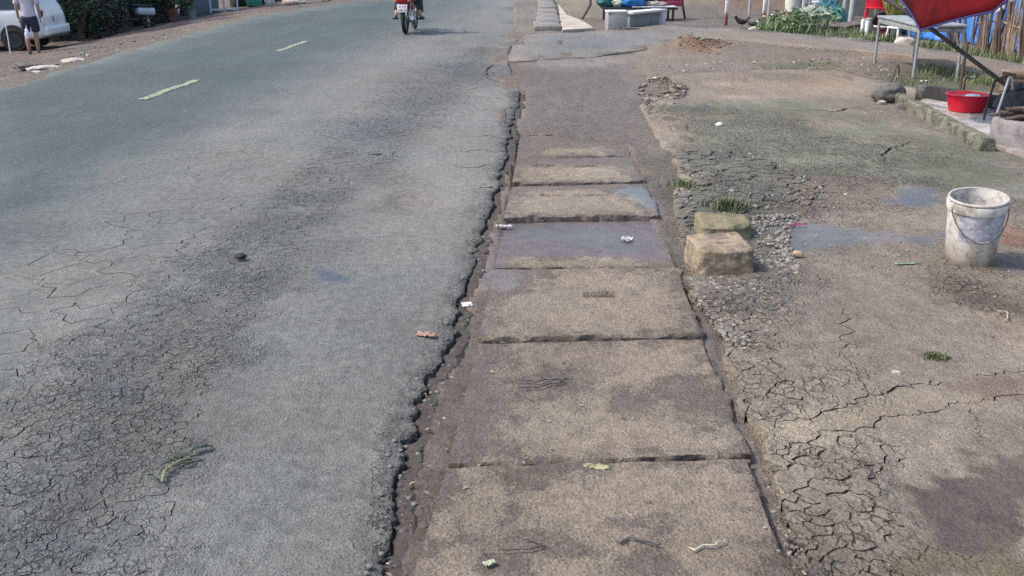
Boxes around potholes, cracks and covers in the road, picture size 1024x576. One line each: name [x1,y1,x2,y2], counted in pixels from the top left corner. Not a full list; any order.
crack [784,108,851,140]
crack [880,142,912,163]
crack [699,277,1024,576]
